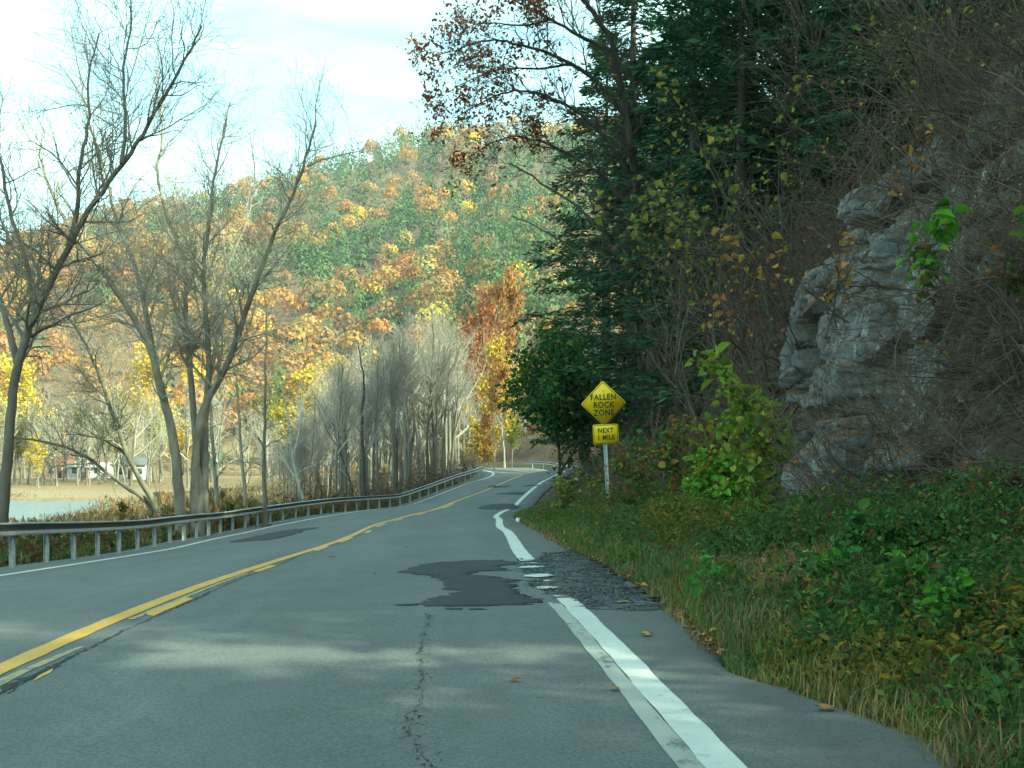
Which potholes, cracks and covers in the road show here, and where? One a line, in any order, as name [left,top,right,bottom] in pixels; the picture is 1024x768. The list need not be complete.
crack [393,613,442,768]
